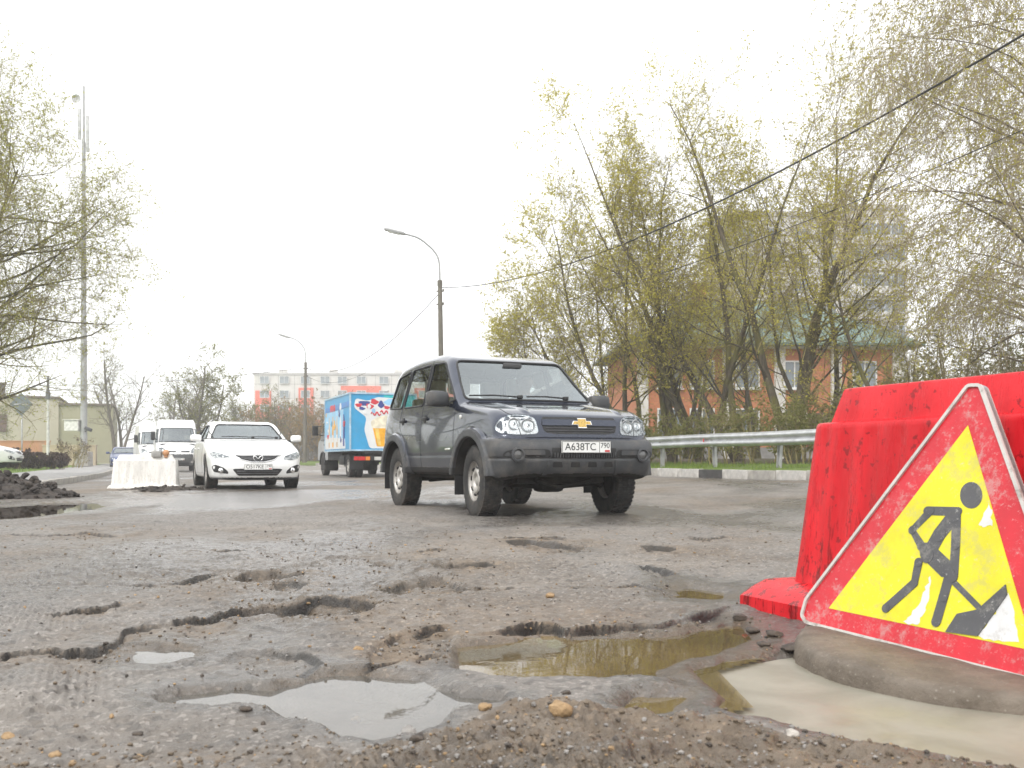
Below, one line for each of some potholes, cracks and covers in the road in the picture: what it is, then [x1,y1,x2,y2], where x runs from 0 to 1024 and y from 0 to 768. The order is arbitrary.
pothole [227,569,310,584]
pothole [154,667,509,740]
pothole [212,647,328,681]
pothole [270,578,312,592]
pothole [128,643,200,664]
pothole [503,538,591,554]
pothole [453,624,761,714]
pothole [0,501,109,514]
pothole [637,544,685,554]
pothole [664,582,738,600]
